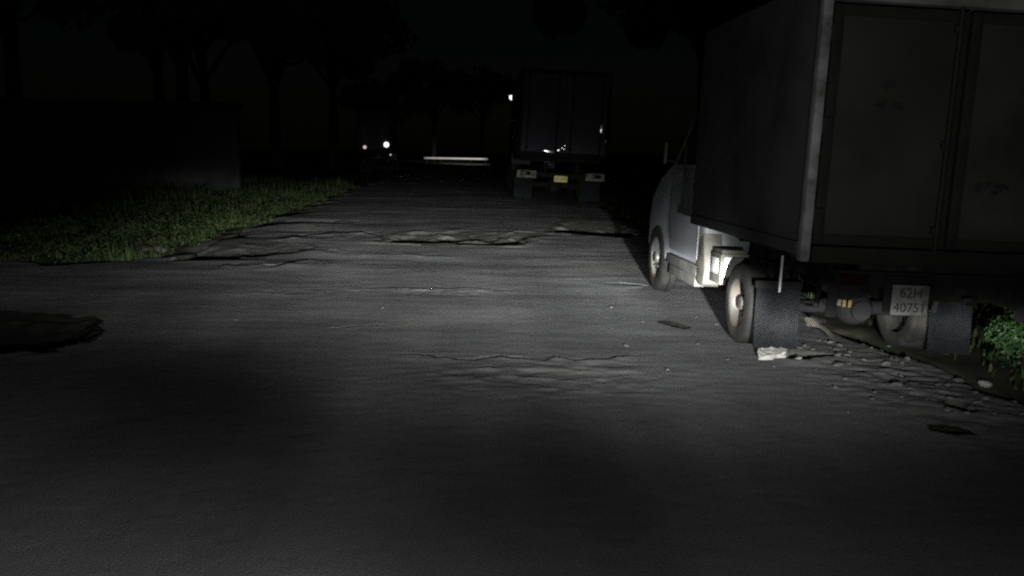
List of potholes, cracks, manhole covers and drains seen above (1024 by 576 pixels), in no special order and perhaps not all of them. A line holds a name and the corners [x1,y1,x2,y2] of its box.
pothole [0,310,107,355]
crack [384,352,645,361]
crack [224,218,444,267]
pothole [657,320,692,329]
pothole [926,425,977,436]
pothole [372,228,563,247]
